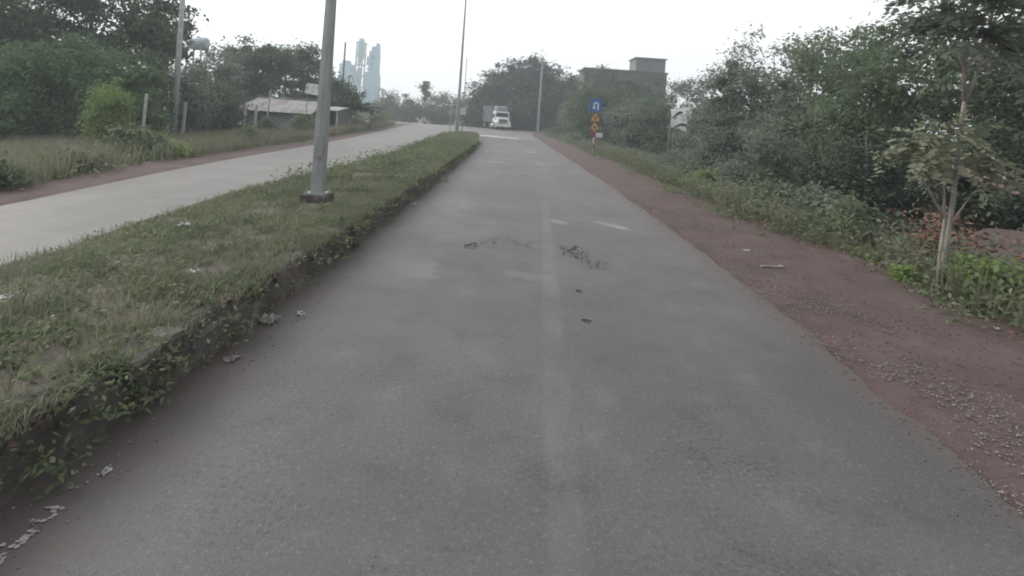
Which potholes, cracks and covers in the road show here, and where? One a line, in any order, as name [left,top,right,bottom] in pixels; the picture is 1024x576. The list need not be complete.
pothole [566,245,591,261]
